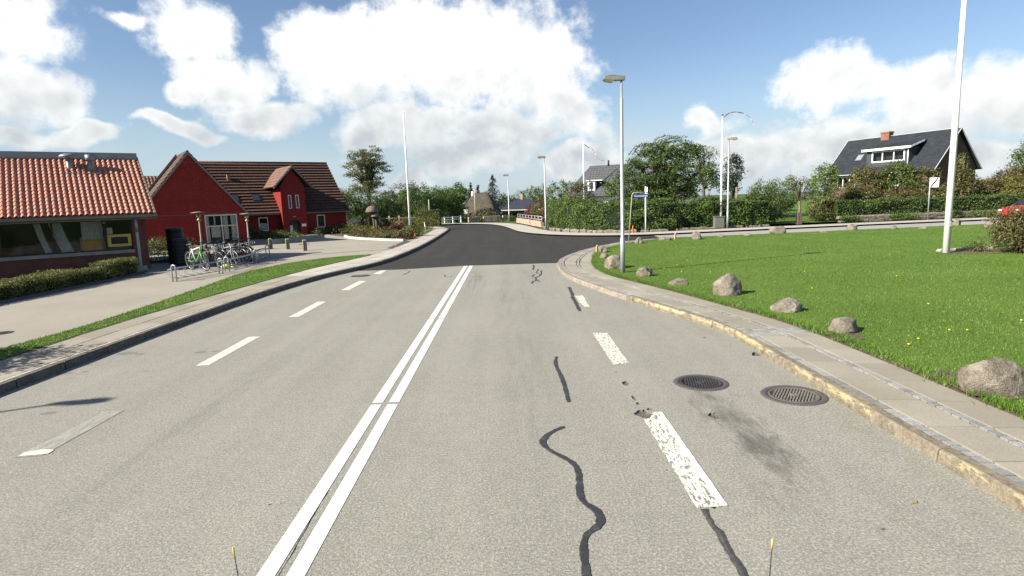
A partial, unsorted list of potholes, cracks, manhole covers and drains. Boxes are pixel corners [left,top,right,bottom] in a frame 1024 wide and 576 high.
manhole cover [760,385,829,406]
manhole cover [673,374,729,391]
